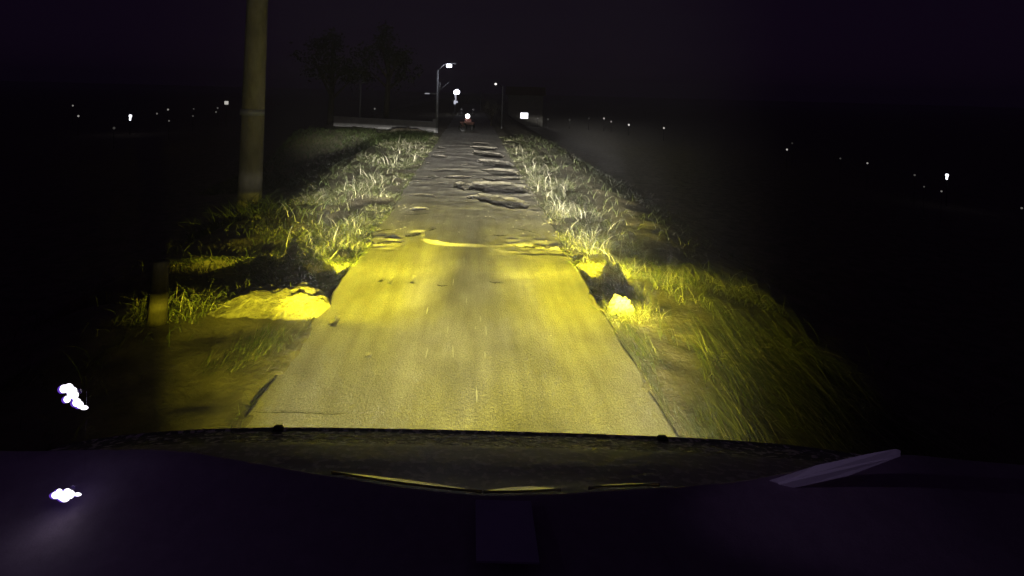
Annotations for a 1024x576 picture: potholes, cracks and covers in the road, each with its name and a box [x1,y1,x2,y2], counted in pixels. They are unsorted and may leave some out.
pothole [468,193,530,209]
pothole [477,159,516,168]
pothole [467,181,532,195]
pothole [472,150,506,159]
